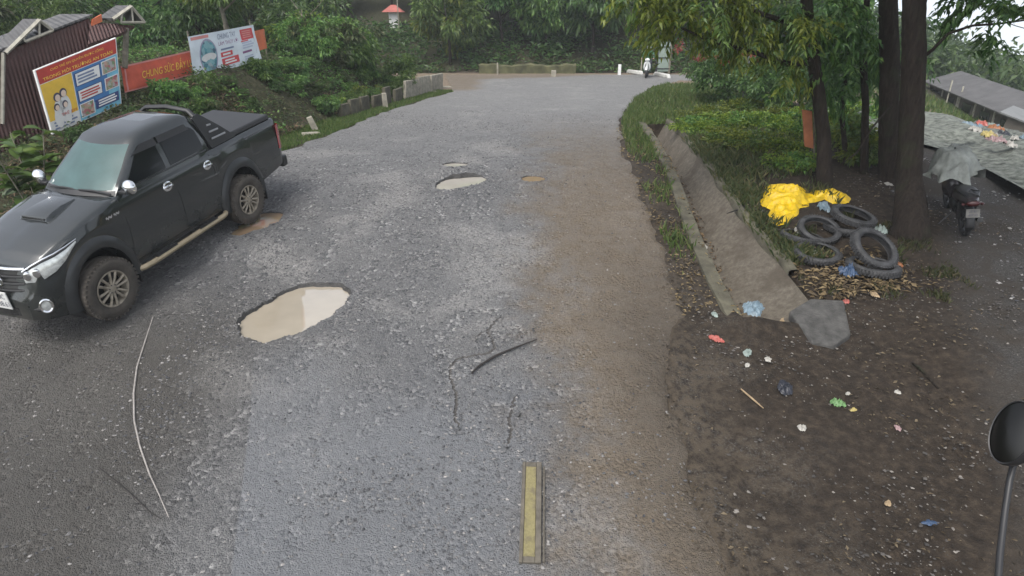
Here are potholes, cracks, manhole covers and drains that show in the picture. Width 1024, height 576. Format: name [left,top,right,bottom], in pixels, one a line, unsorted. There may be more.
pothole [430,170,492,192]
pothole [224,209,289,239]
pothole [518,175,548,183]
pothole [225,277,362,351]
crack [443,317,520,448]
